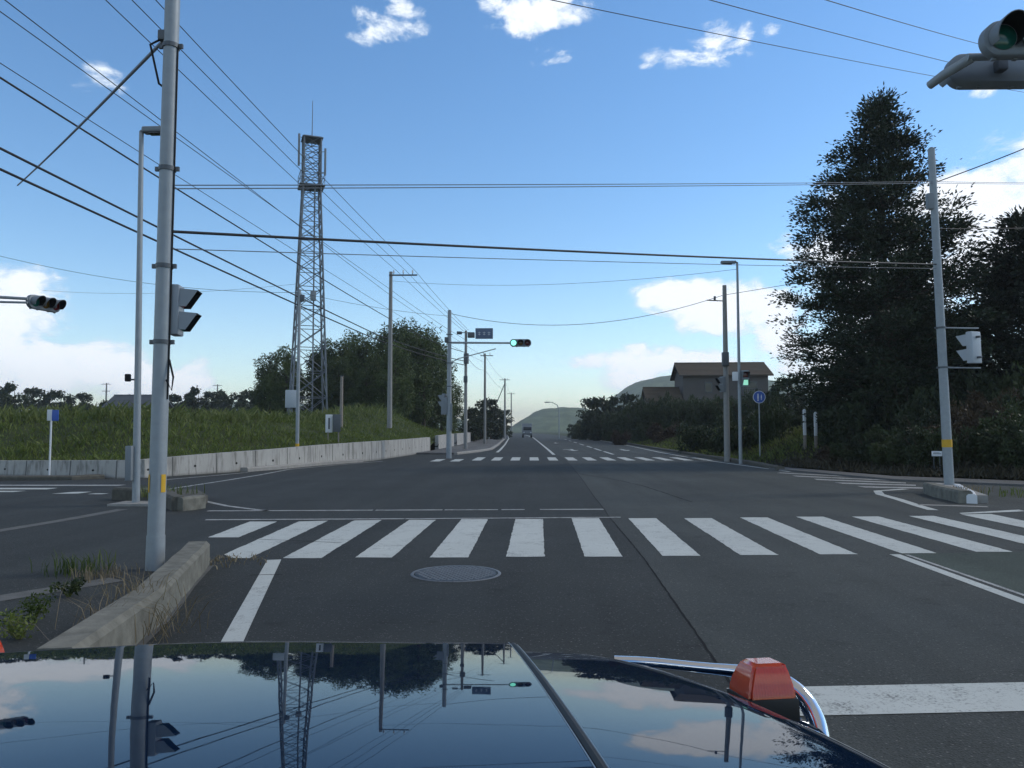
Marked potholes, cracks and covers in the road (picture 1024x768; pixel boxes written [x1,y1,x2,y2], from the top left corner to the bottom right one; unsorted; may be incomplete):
manhole cover [410,565,501,582]
